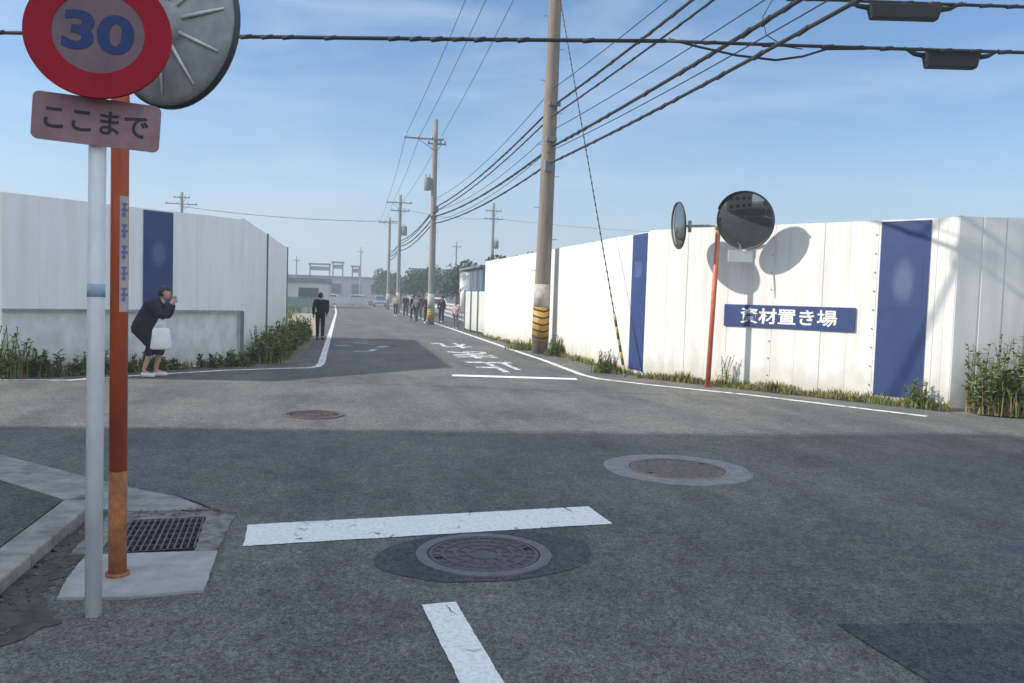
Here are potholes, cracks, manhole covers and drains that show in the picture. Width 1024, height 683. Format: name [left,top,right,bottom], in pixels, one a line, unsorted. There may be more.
manhole cover [282,410,344,420]
manhole cover [604,454,753,486]
manhole cover [373,530,591,582]
drain grate [127,517,205,553]
